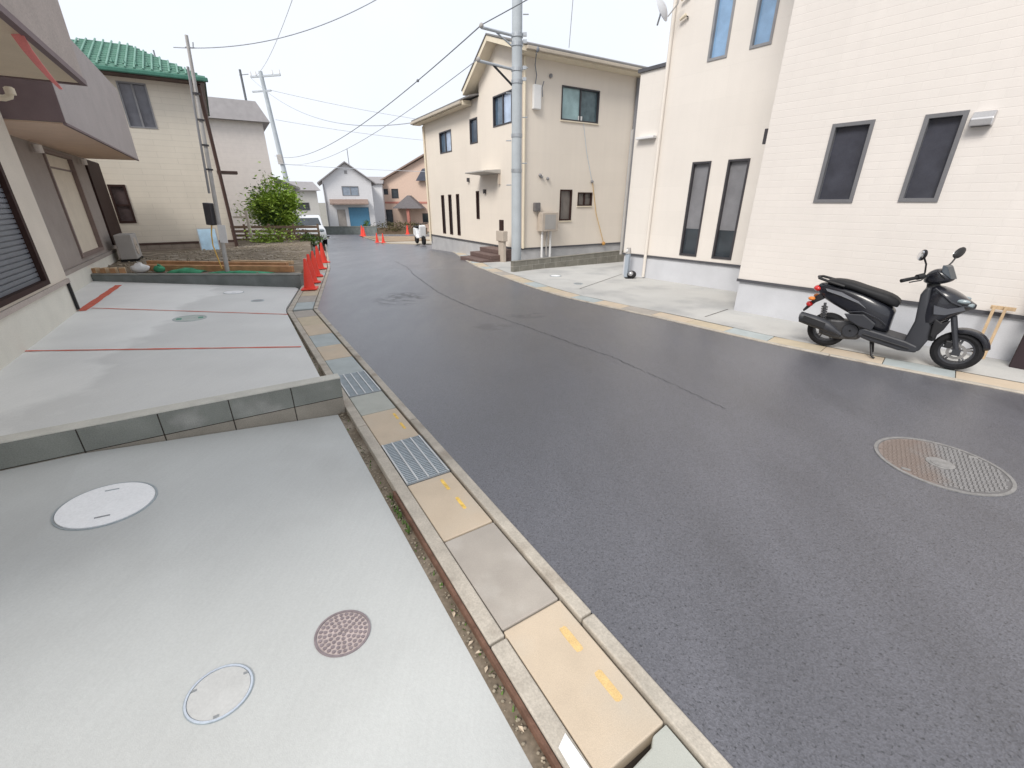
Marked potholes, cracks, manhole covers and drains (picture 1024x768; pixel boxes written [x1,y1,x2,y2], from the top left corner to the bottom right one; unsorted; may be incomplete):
crack [395,261,726,409]
drain grate [339,370,381,399]
utility cover [51,481,158,531]
drain grate [381,435,450,487]
utility cover [182,663,254,725]
manhole cover [874,437,1017,497]
